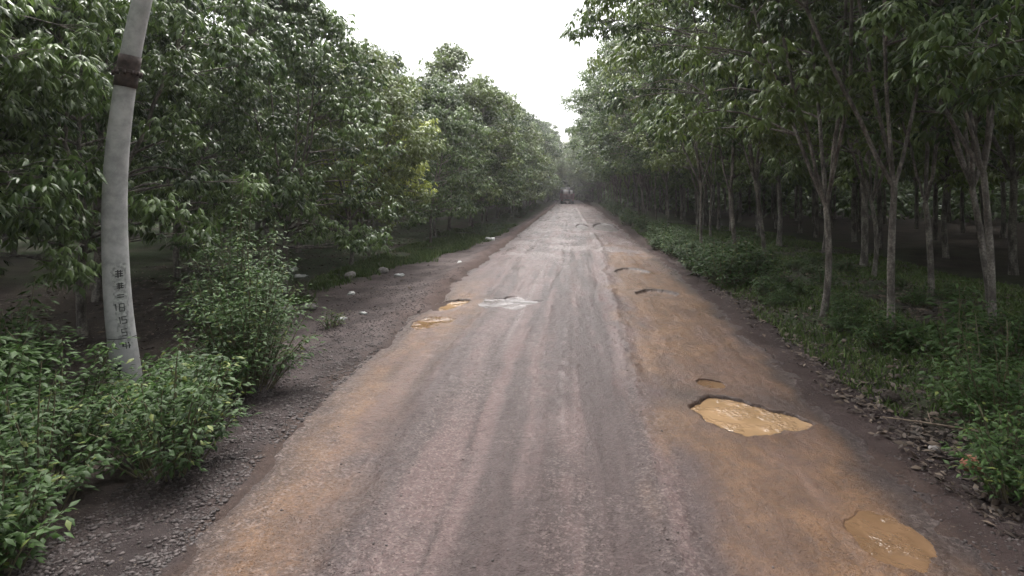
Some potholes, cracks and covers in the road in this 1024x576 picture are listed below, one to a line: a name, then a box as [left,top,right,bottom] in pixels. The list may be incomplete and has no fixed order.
pothole [826,500,956,576]
pothole [668,389,845,447]
pothole [573,223,590,231]
pothole [588,222,624,234]
pothole [401,314,465,333]
pothole [690,377,733,391]
pothole [627,287,687,301]
pothole [462,294,556,313]
pothole [425,297,476,314]
pothole [607,266,657,277]
